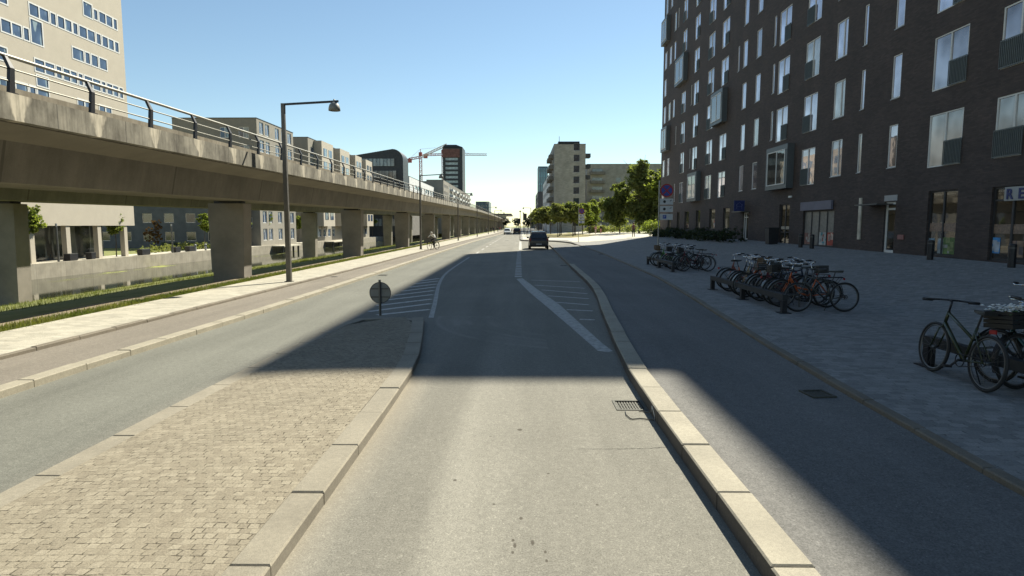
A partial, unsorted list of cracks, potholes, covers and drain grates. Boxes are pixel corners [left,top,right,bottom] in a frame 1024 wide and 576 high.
drain grate [612,400,648,411]
drain grate [798,389,837,398]
